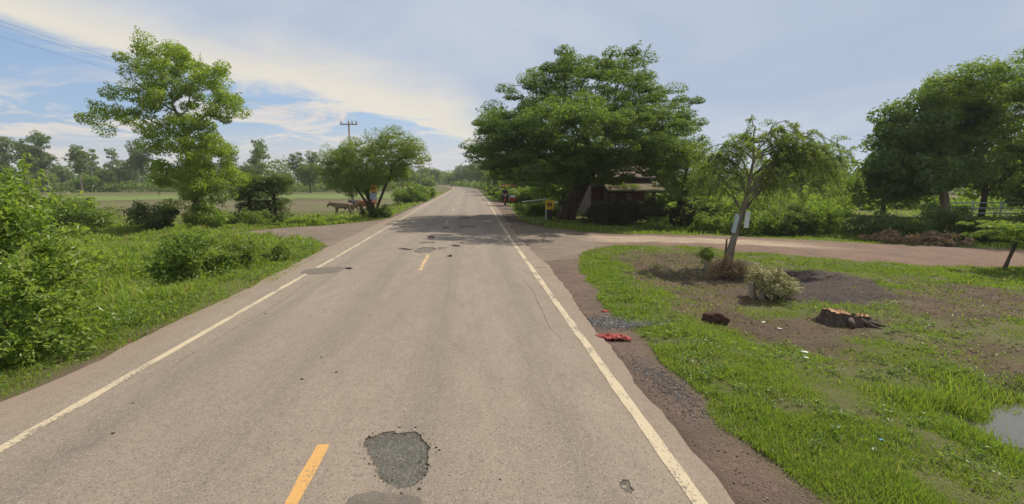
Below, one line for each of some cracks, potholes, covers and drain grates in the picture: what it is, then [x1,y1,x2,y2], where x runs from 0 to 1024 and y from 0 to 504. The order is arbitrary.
pothole [363,431,431,489]
pothole [620,479,634,494]
